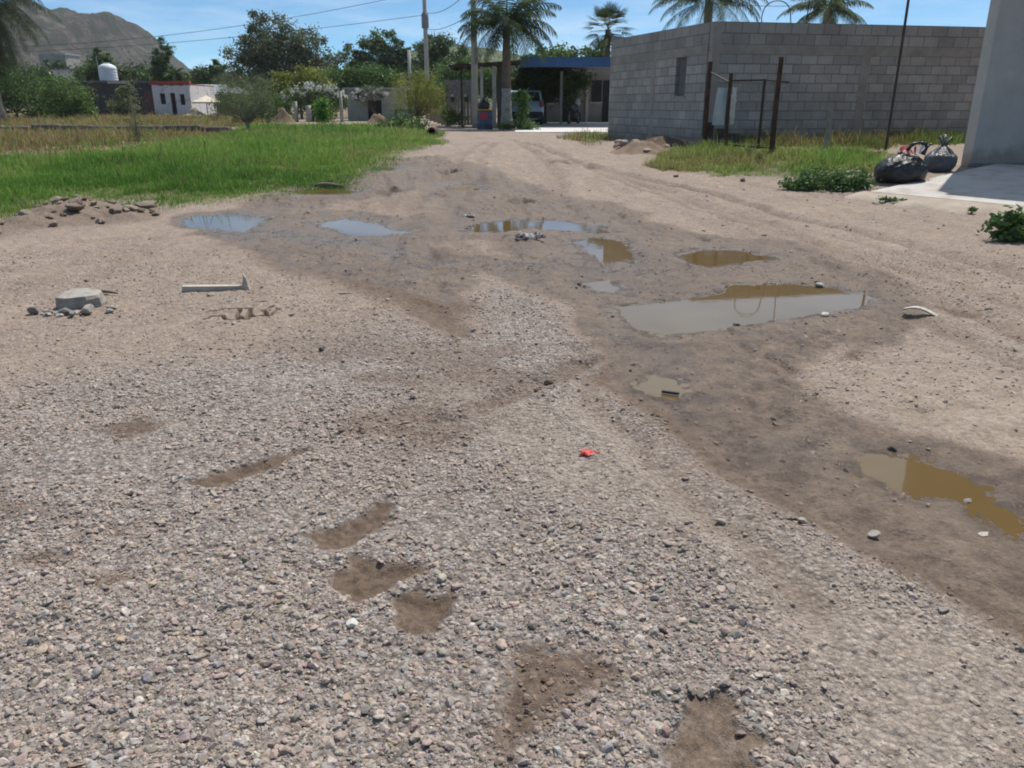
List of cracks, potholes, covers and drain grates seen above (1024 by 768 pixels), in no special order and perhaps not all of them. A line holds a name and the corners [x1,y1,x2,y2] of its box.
pothole [847,447,1024,541]
pothole [676,249,782,268]
pothole [178,444,322,490]
pothole [645,679,794,768]
pothole [181,213,268,232]
pothole [630,373,694,402]
pothole [318,546,450,606]
pothole [469,219,614,233]
pothole [376,575,483,644]
pothole [608,283,882,338]
pothole [318,218,415,237]
pothole [292,495,402,553]
